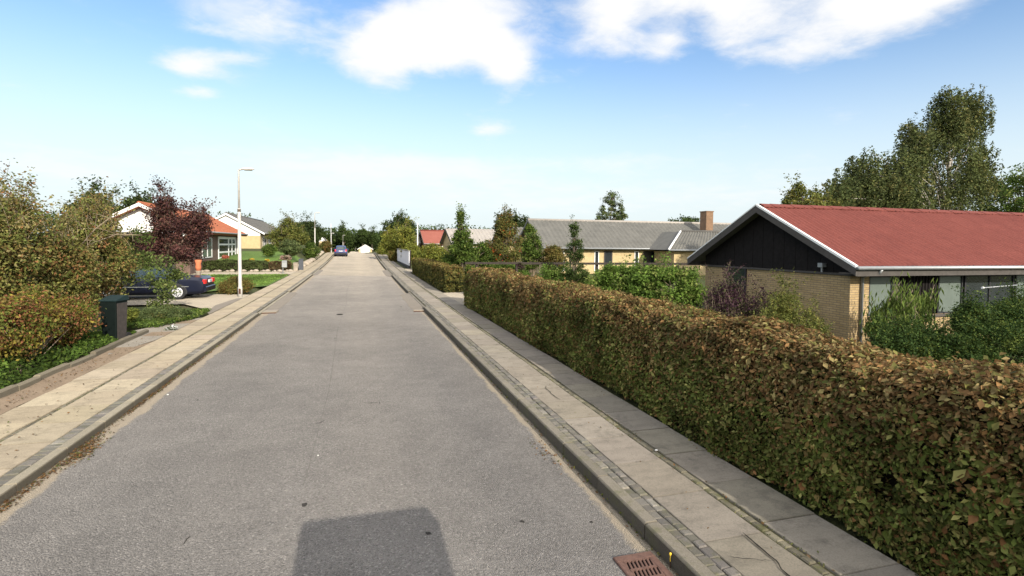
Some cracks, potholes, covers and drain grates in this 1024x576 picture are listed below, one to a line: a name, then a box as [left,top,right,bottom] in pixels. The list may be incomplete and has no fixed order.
drain grate [613,551,674,576]
